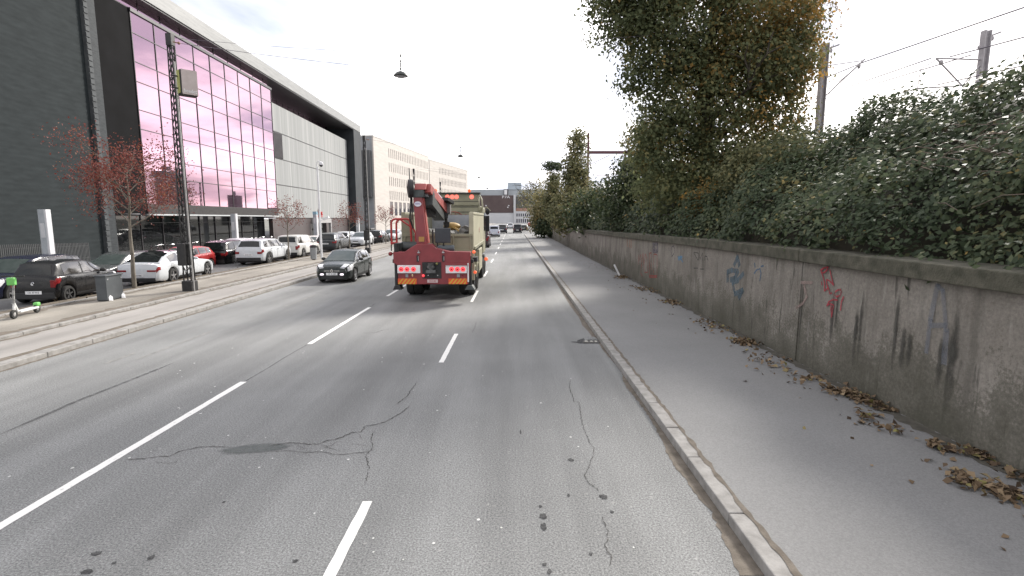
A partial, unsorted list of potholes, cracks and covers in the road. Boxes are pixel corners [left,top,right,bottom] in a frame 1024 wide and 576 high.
crack [271,383,416,483]
crack [569,381,598,490]
